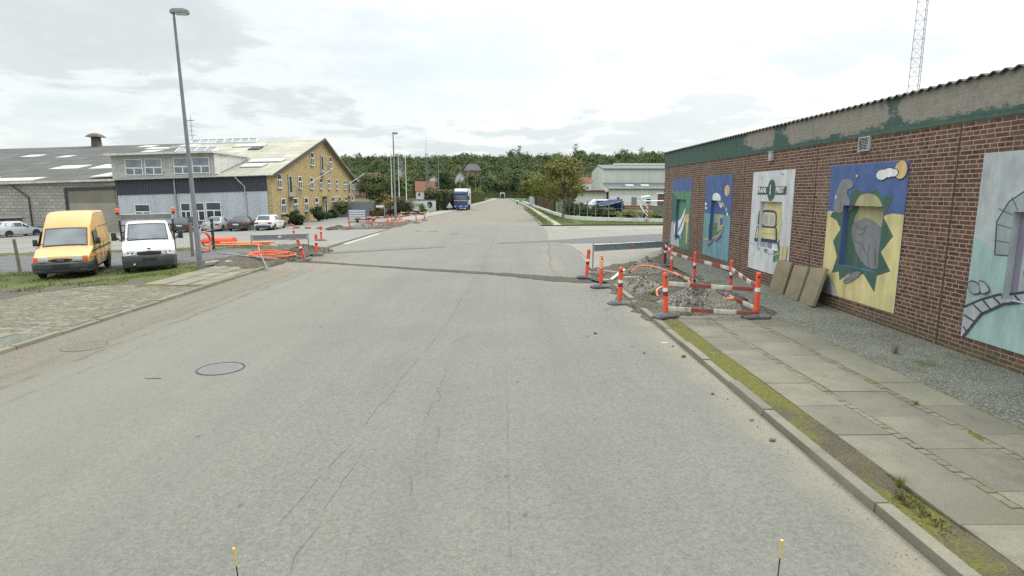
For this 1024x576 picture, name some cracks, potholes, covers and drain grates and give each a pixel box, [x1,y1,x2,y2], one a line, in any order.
crack [364,248,491,425]
manhole cover [59,341,109,352]
manhole cover [195,362,246,375]
